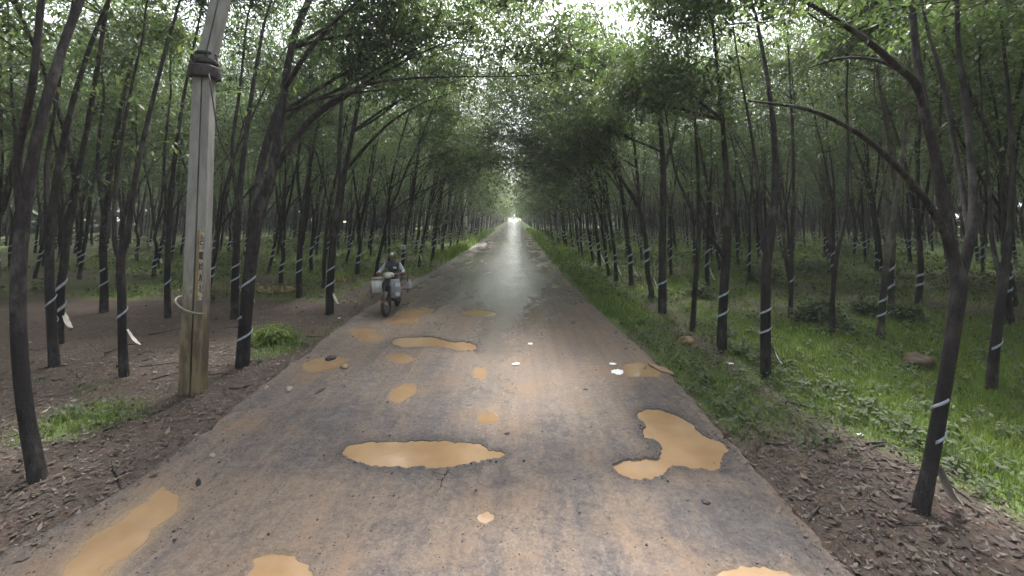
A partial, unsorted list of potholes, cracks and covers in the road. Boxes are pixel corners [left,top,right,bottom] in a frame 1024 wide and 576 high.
pothole [474,510,499,524]
pothole [612,408,729,480]
pothole [385,352,418,363]
pothole [475,411,502,424]
pothole [619,361,664,377]
pothole [300,355,350,372]
pothole [37,476,199,576]
pothole [347,327,385,343]
pothole [391,336,478,351]
pothole [342,439,506,469]
pothole [382,307,438,326]
pothole [705,562,801,576]
